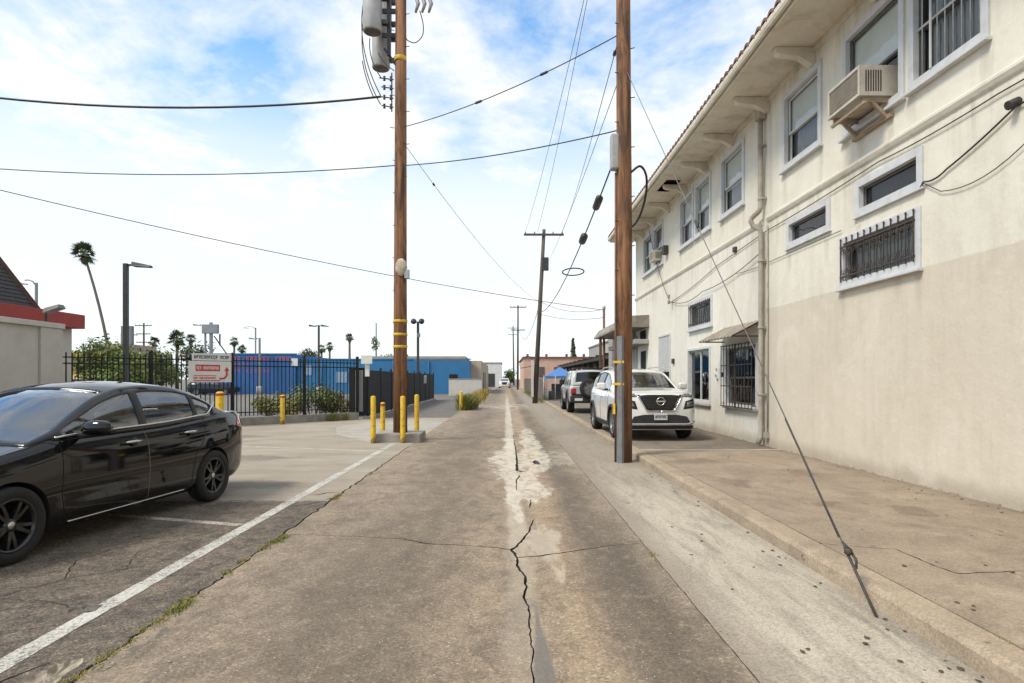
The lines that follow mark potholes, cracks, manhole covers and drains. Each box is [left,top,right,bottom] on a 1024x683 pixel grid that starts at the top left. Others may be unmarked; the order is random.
crack [292,436,641,683]
crack [0,531,217,635]
crack [818,542,1014,574]
